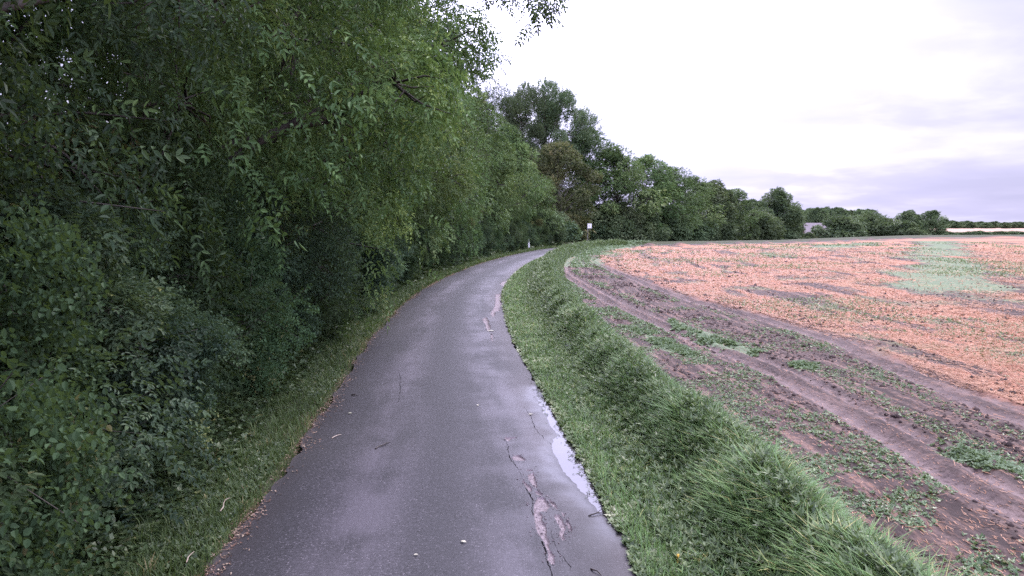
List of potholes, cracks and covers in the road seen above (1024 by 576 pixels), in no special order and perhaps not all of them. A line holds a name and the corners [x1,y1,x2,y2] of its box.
crack [504,440,571,576]
